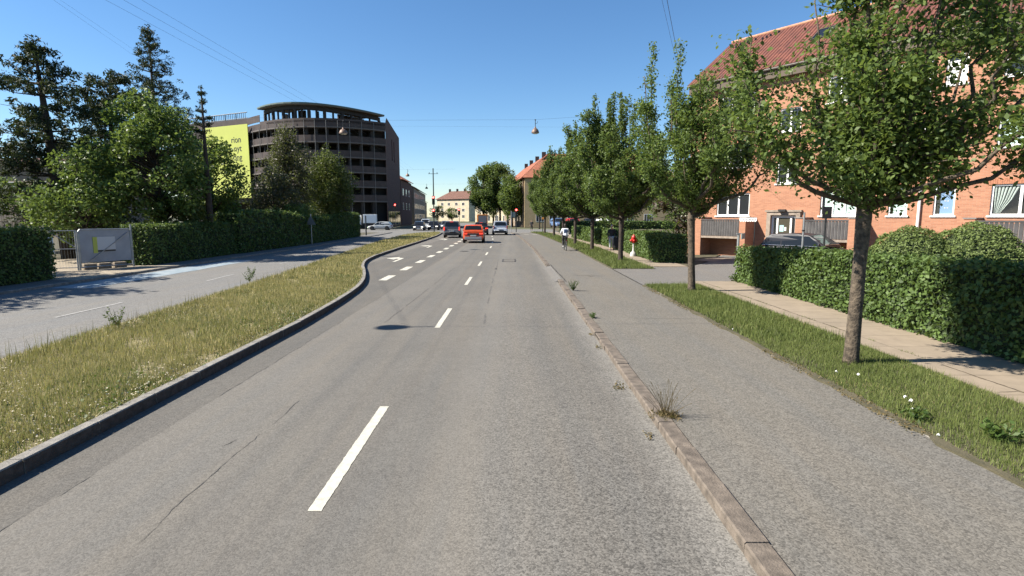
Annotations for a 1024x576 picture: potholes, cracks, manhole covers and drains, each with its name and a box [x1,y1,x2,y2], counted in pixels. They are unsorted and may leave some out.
crack [135,402,297,545]
